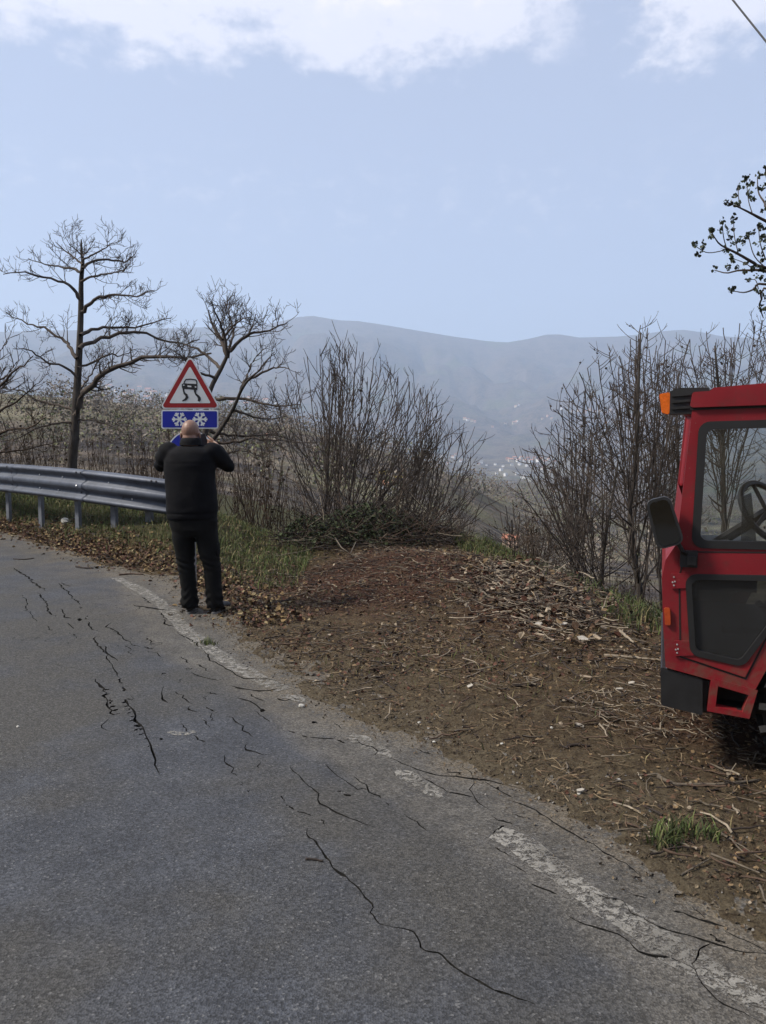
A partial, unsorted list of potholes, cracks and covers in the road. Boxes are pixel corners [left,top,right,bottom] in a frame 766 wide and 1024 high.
crack [289,722,766,1024]
crack [14,568,299,792]
